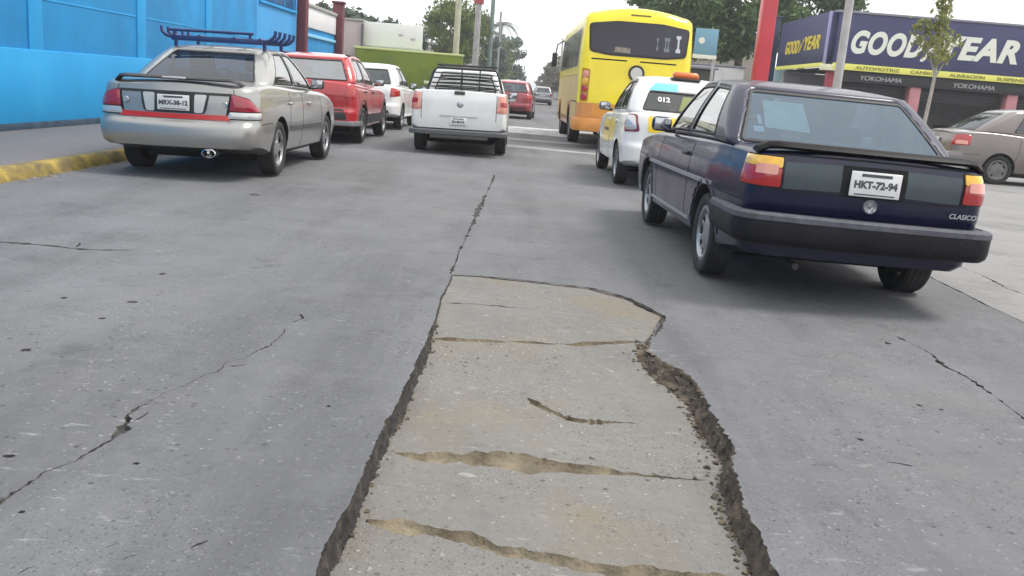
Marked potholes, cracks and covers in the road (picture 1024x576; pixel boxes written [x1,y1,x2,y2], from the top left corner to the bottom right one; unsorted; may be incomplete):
crack [432,175,666,346]
crack [367,518,727,576]
crack [0,314,304,504]
crack [896,336,1024,419]
crack [0,238,113,251]
crack [395,450,694,480]
